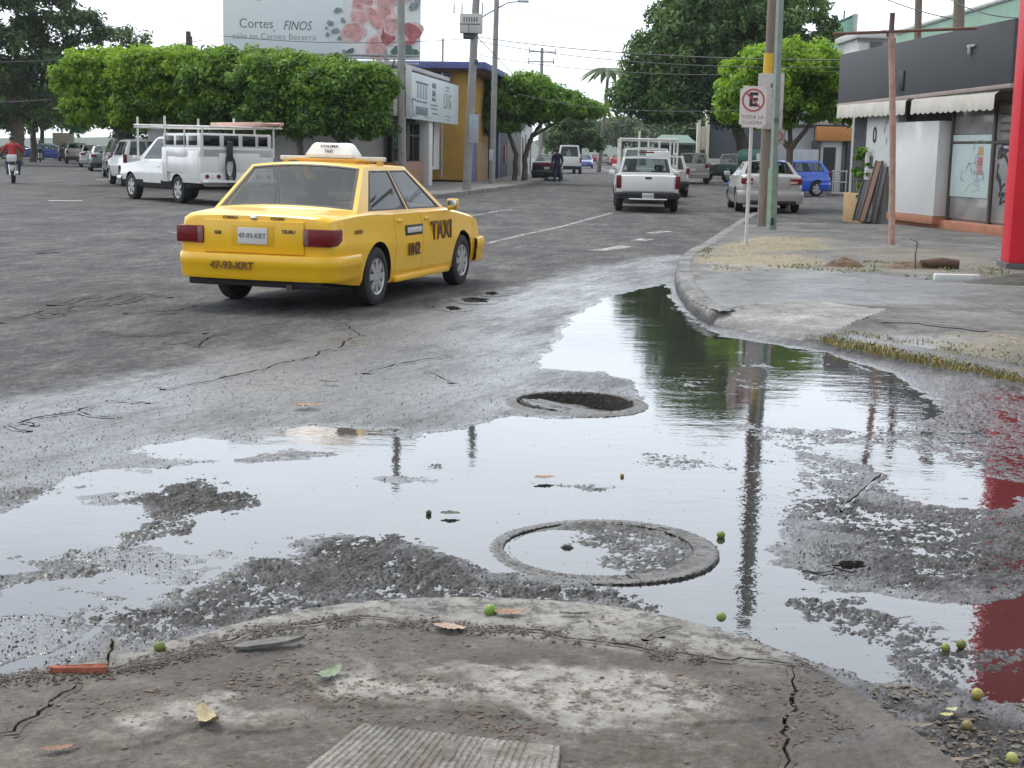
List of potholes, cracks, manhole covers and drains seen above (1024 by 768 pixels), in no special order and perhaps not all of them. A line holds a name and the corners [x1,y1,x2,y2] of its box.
manhole cover [488,519,720,586]
pothole [448,296,501,304]
manhole cover [505,390,649,417]
crack [773,663,804,768]
pothole [826,558,872,572]
crack [0,683,82,738]
crack [424,371,458,384]
crack [0,293,366,432]
